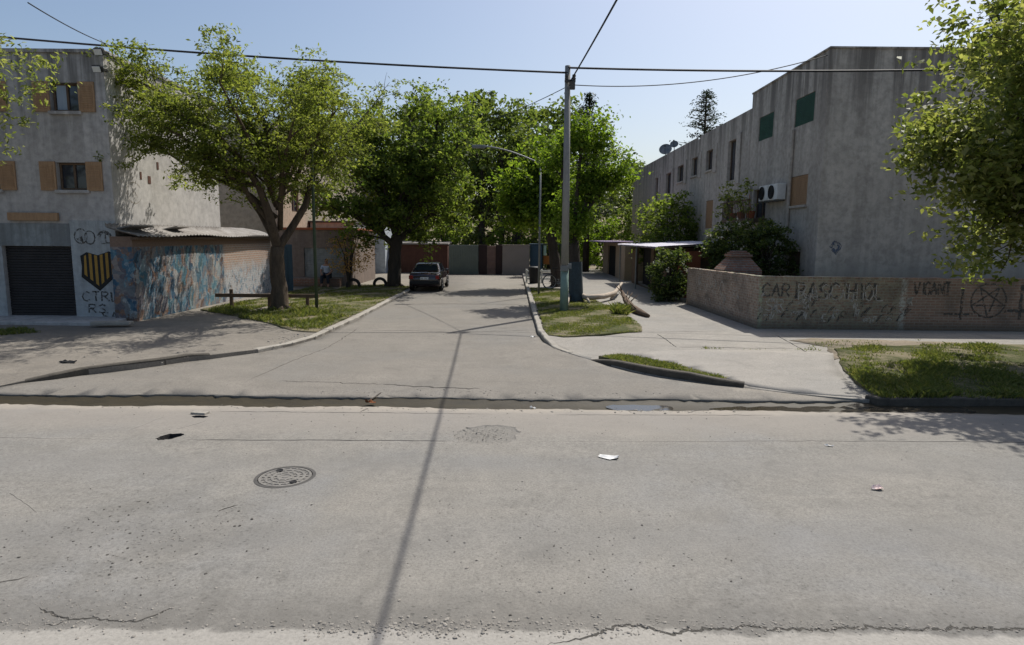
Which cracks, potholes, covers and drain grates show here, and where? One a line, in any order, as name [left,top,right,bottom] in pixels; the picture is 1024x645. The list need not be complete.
manhole cover [254,466,316,488]
crack [548,623,1024,645]
crack [39,607,169,626]
